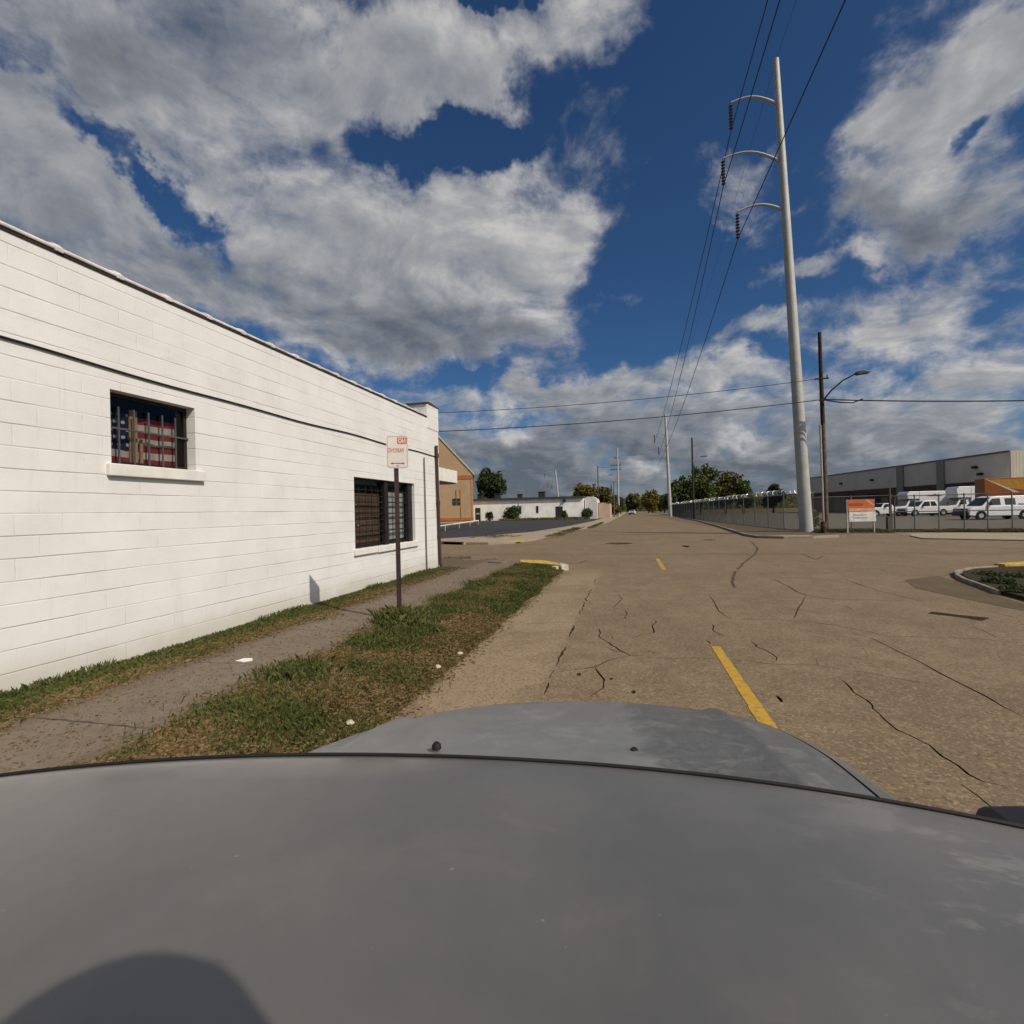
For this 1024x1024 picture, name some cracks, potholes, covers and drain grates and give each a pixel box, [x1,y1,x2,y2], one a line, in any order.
crack [544,542,1023,806]
